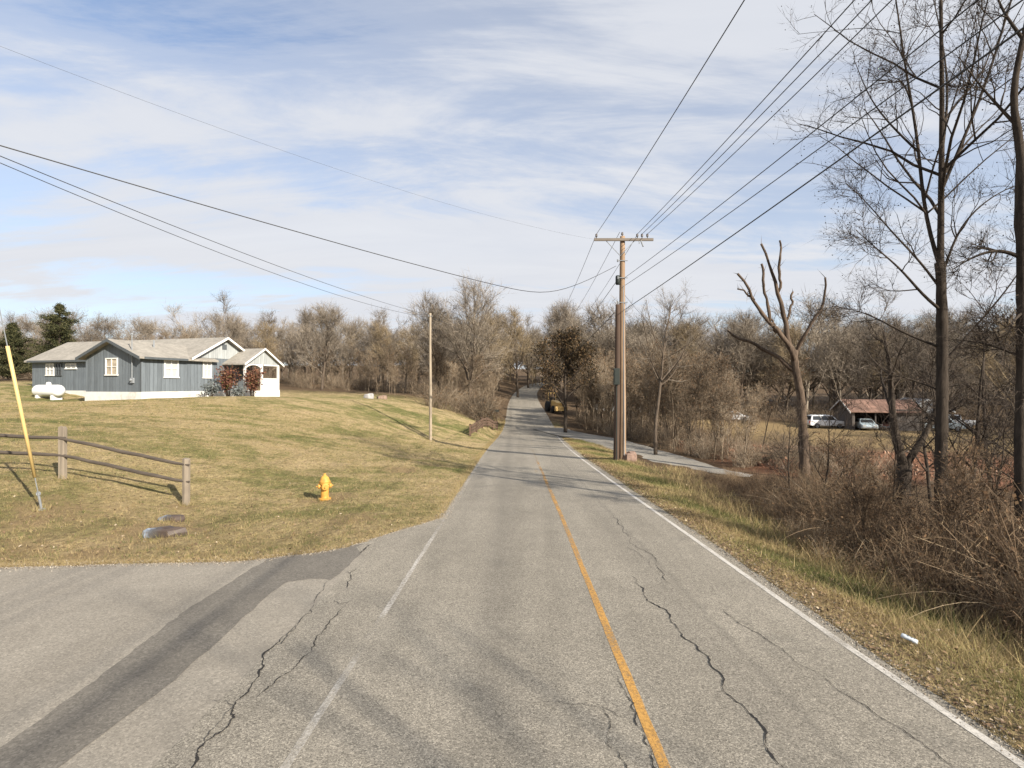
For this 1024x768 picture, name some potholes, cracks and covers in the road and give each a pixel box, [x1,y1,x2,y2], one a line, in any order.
crack [191,570,354,768]
crack [725,612,953,766]
crack [617,519,783,767]
